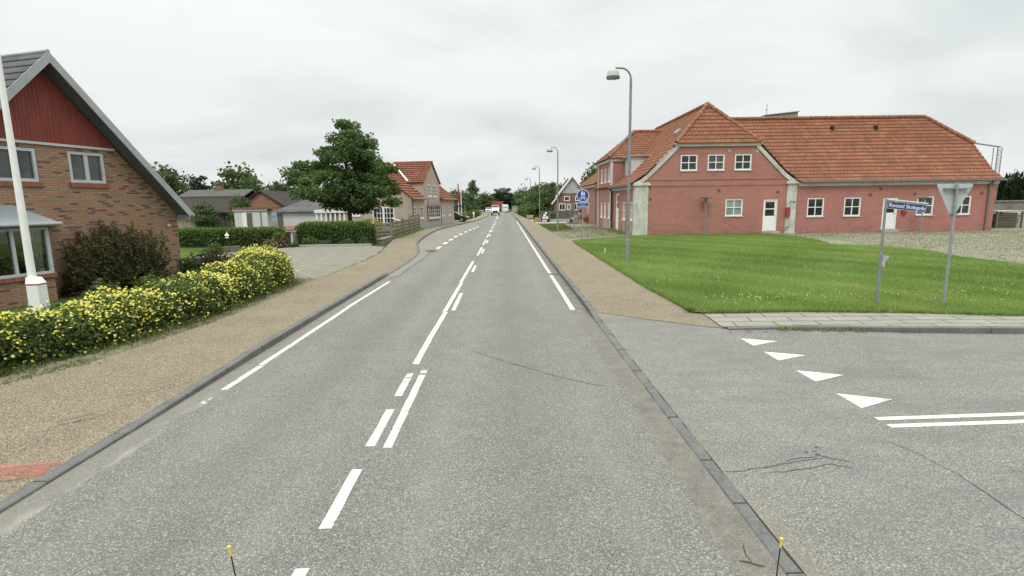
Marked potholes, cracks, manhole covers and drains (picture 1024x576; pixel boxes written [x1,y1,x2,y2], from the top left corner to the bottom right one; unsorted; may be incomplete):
crack [739,544,765,567]
crack [474,351,601,386]
crack [890,442,1024,519]
crack [724,446,847,472]
